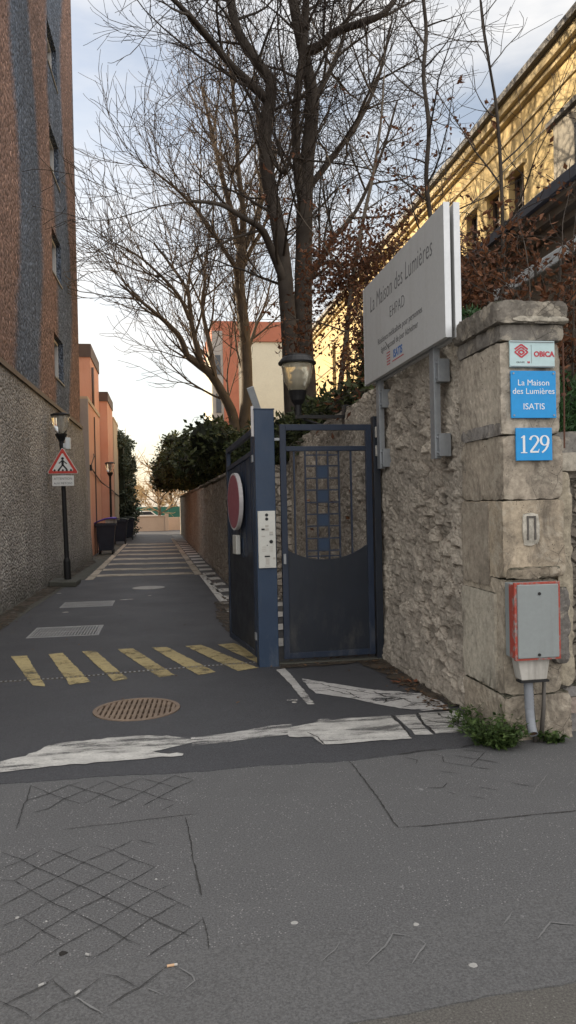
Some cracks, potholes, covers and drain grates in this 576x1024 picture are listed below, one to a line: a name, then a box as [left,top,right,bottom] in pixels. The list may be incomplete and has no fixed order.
manhole cover [93,698,180,721]
drain grate [26,625,104,638]
crack [0,775,570,1020]
